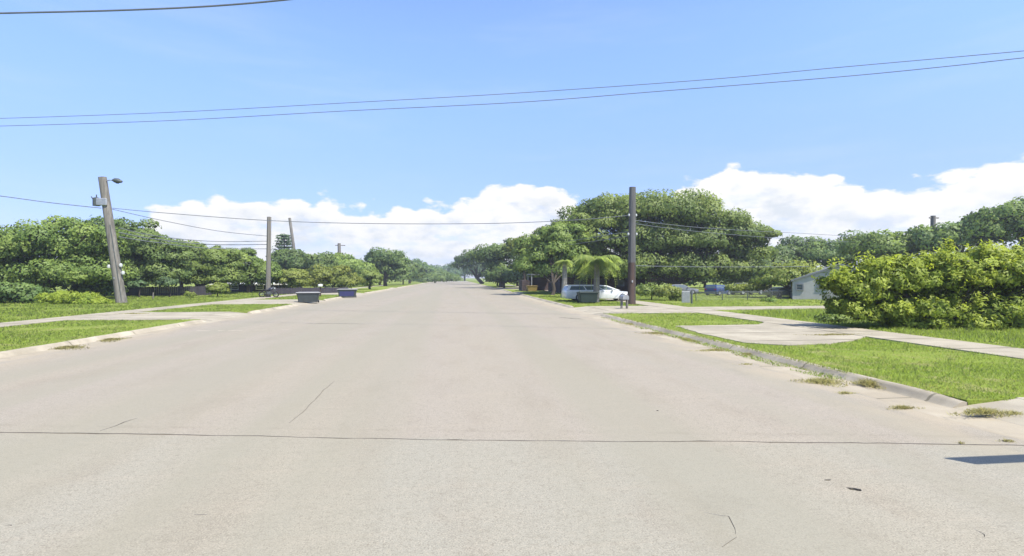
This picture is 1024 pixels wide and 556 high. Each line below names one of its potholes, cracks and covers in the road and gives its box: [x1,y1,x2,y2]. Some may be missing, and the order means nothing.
crack [0,383,1024,446]
